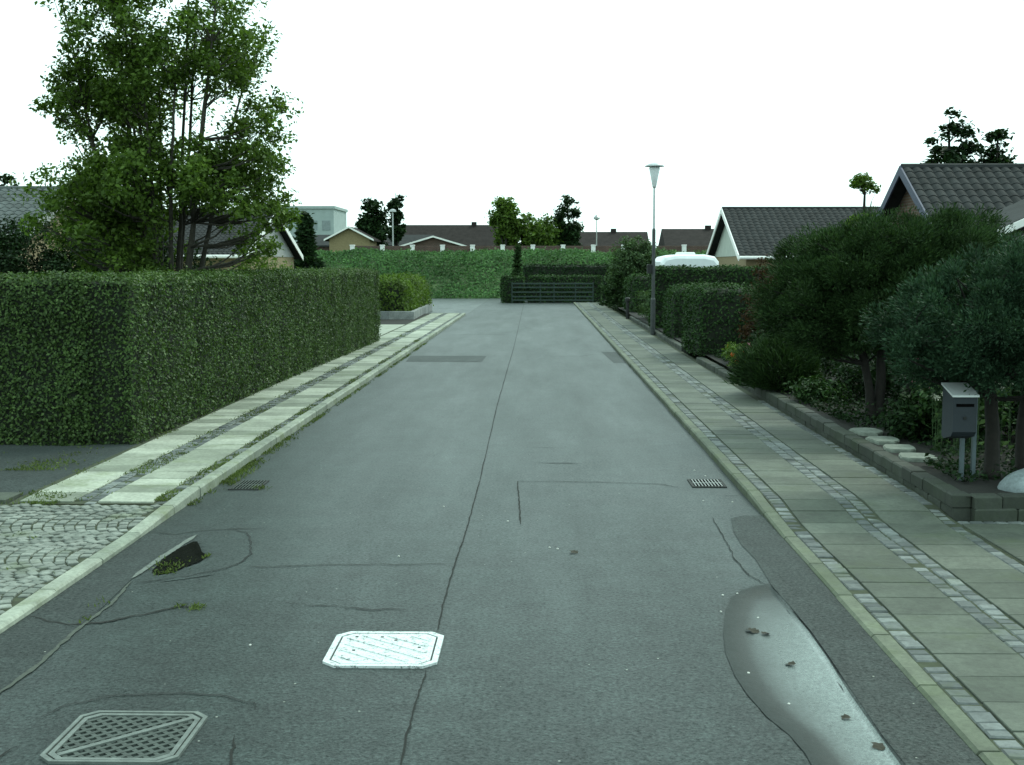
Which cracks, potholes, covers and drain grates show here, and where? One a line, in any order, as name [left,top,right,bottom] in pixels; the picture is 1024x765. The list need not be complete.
drain grate [228,480,269,490]
drain grate [687,479,727,488]
pothole [152,541,207,575]
crack [400,671,426,765]
manhole cover [322,631,444,669]
crack [32,606,191,625]
manhole cover [40,710,208,765]
crack [713,518,763,583]
